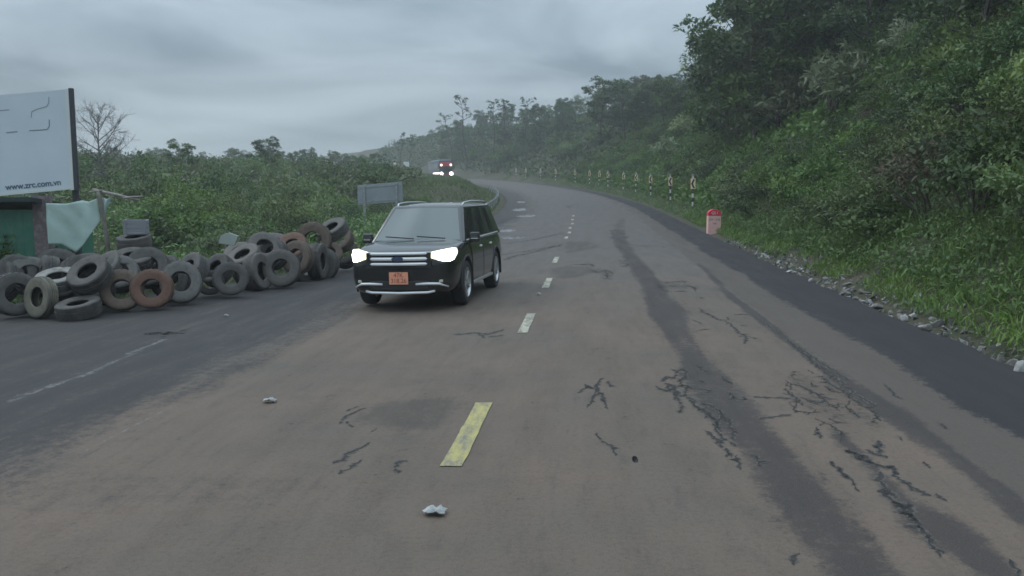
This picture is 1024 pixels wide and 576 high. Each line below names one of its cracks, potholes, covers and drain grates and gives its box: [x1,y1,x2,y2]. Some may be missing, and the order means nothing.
crack [332,406,376,474]
crack [655,281,947,557]
crack [454,329,504,338]
crack [595,433,618,455]
crack [577,378,614,409]
crack [392,460,406,473]
